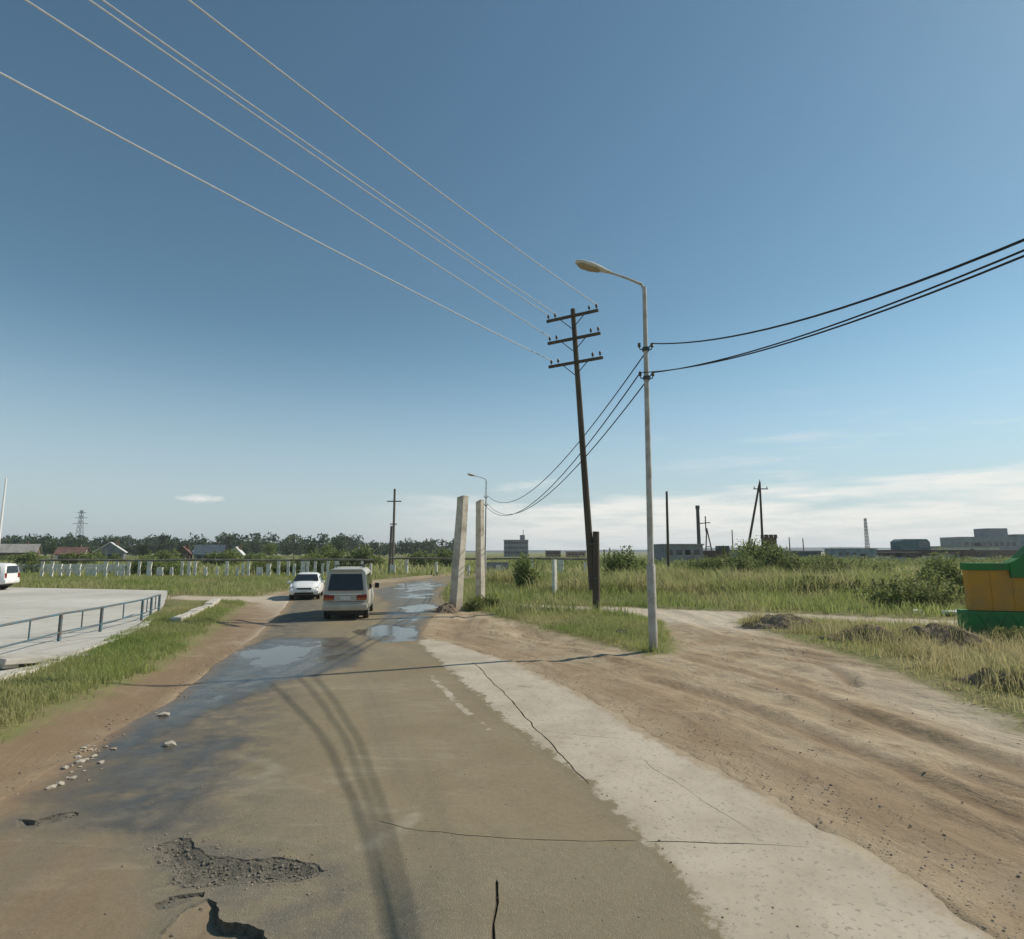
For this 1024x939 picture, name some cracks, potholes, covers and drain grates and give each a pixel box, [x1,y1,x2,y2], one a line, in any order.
crack [380,821,798,847]
pothole [159,898,267,939]
crack [472,662,609,784]
crack [491,880,499,939]
pothole [152,837,328,889]
pothole [13,812,79,828]
